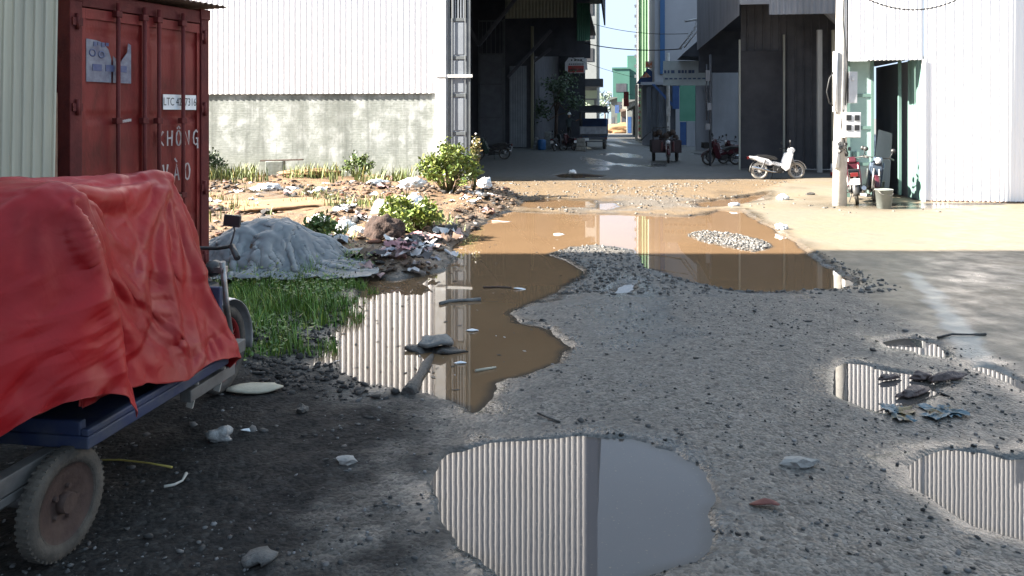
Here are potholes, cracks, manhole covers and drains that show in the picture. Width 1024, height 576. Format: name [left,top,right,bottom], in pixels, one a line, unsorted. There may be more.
pothole [898,446,1024,543]
pothole [870,335,954,357]
pothole [587,201,623,210]
pothole [426,432,727,576]
pothole [823,358,948,416]
pothole [309,208,866,417]
pothole [959,360,1024,394]
